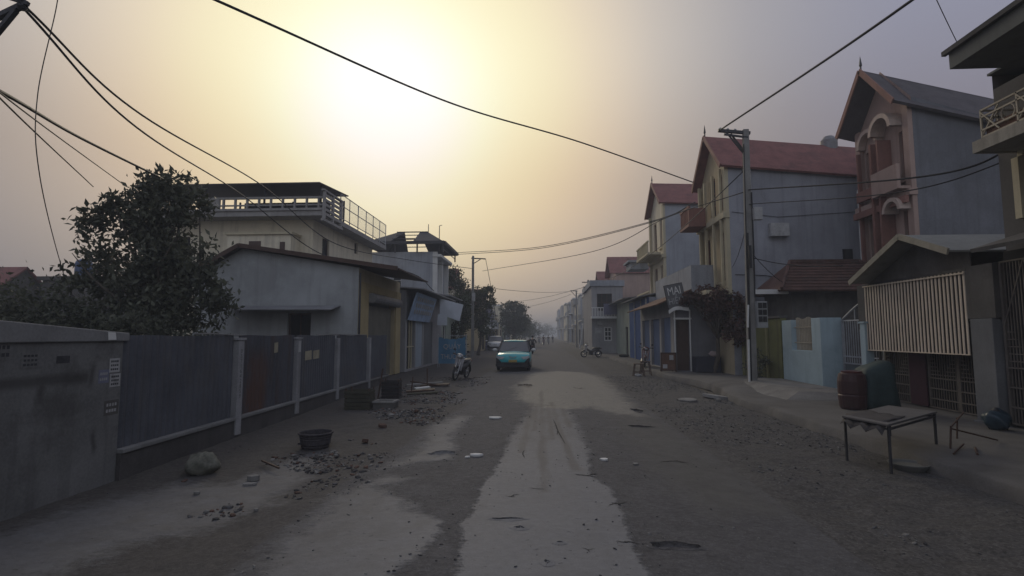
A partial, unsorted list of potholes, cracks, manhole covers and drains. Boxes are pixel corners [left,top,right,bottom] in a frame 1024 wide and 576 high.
pothole [643,539,708,551]
